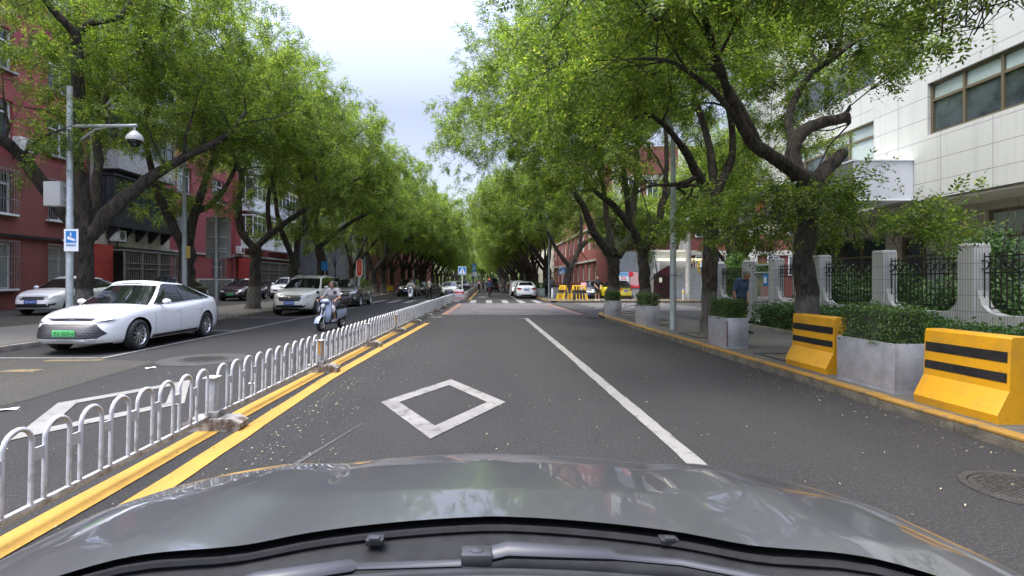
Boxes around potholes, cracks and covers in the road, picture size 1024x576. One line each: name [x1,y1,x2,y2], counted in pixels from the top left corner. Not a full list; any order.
manhole cover [154,353,248,366]
manhole cover [957,470,1024,505]
